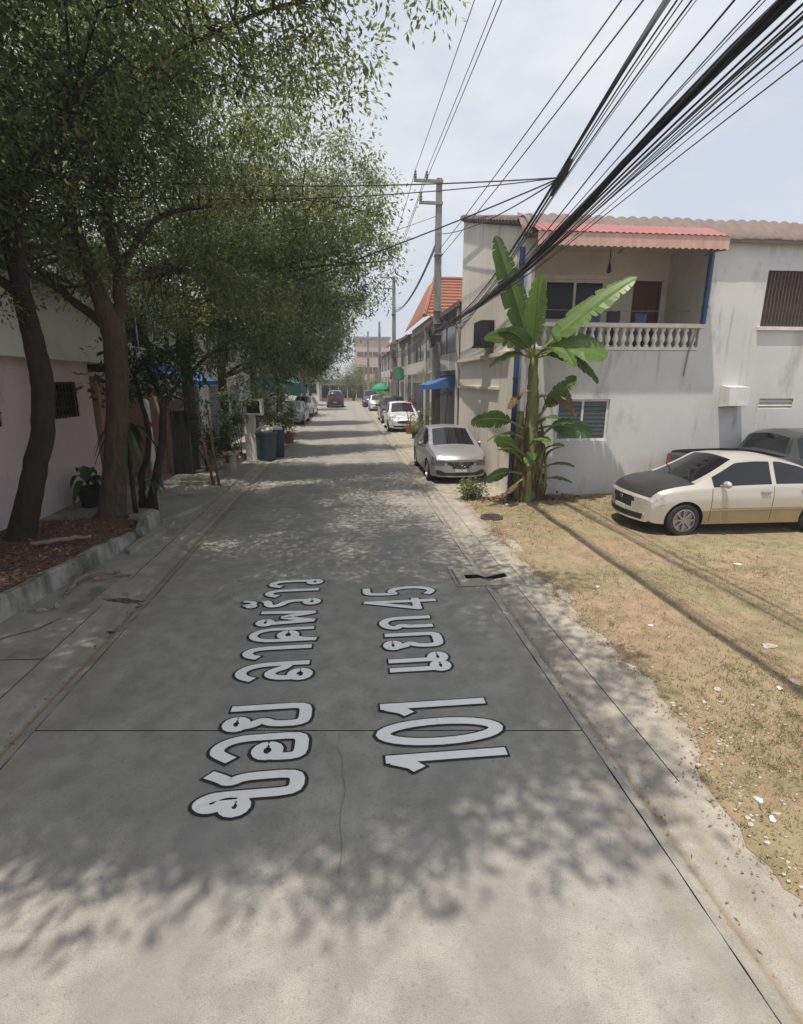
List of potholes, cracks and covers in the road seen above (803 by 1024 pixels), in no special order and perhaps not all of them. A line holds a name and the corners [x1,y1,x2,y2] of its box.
manhole cover [480,513,503,521]
drain grate [447,564,525,589]
crack [337,734,346,879]
